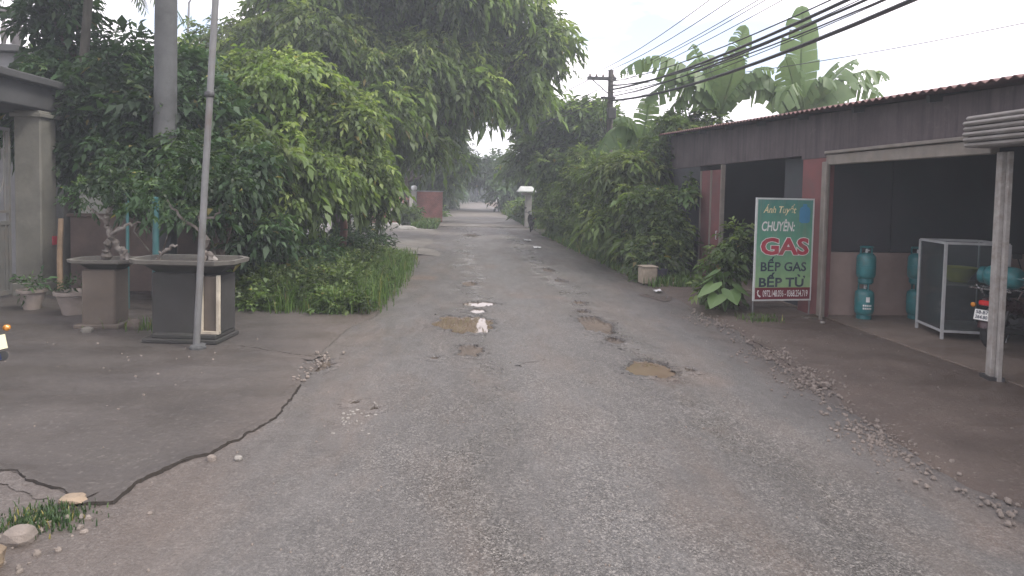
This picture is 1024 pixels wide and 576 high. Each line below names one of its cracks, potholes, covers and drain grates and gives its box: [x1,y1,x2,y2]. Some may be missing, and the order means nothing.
crack [0,382,306,513]
pothole [423,313,505,336]
pothole [569,314,624,338]
pothole [297,357,346,376]
pothole [596,335,634,347]
pothole [453,300,508,308]
pothole [612,356,689,382]
pothole [449,342,491,360]
